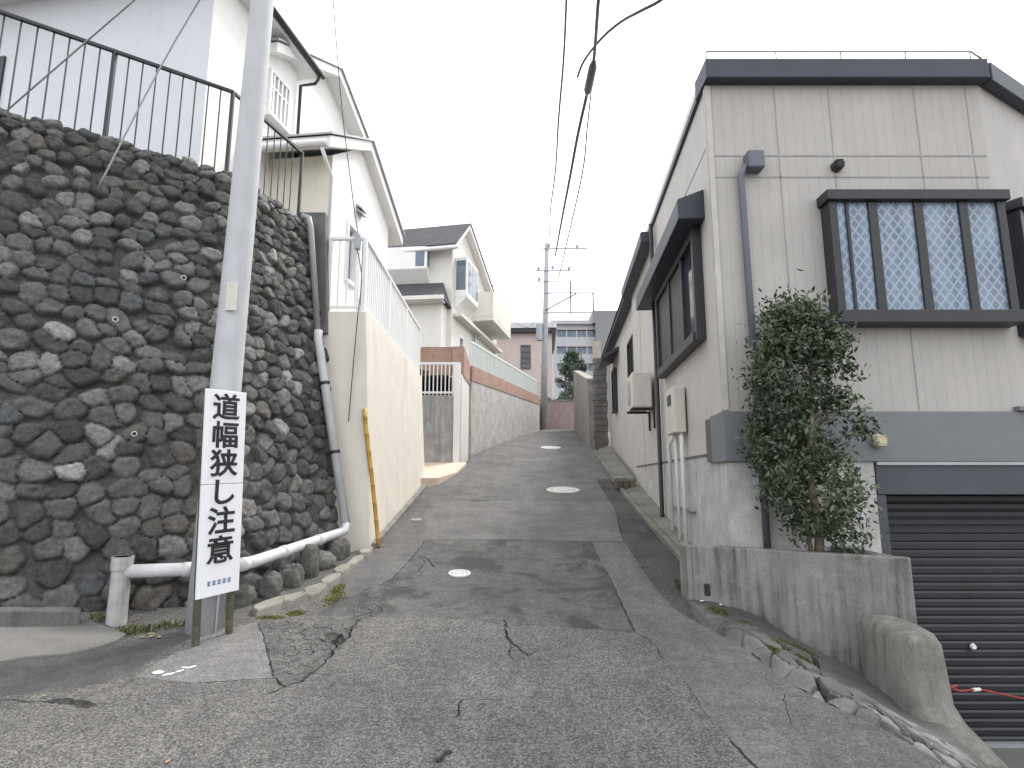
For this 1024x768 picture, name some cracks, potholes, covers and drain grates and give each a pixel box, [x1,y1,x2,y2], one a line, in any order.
crack [690,688,758,768]
crack [483,569,662,660]
crack [169,541,436,695]
crack [455,699,503,718]
manhole cover [448,569,471,577]
